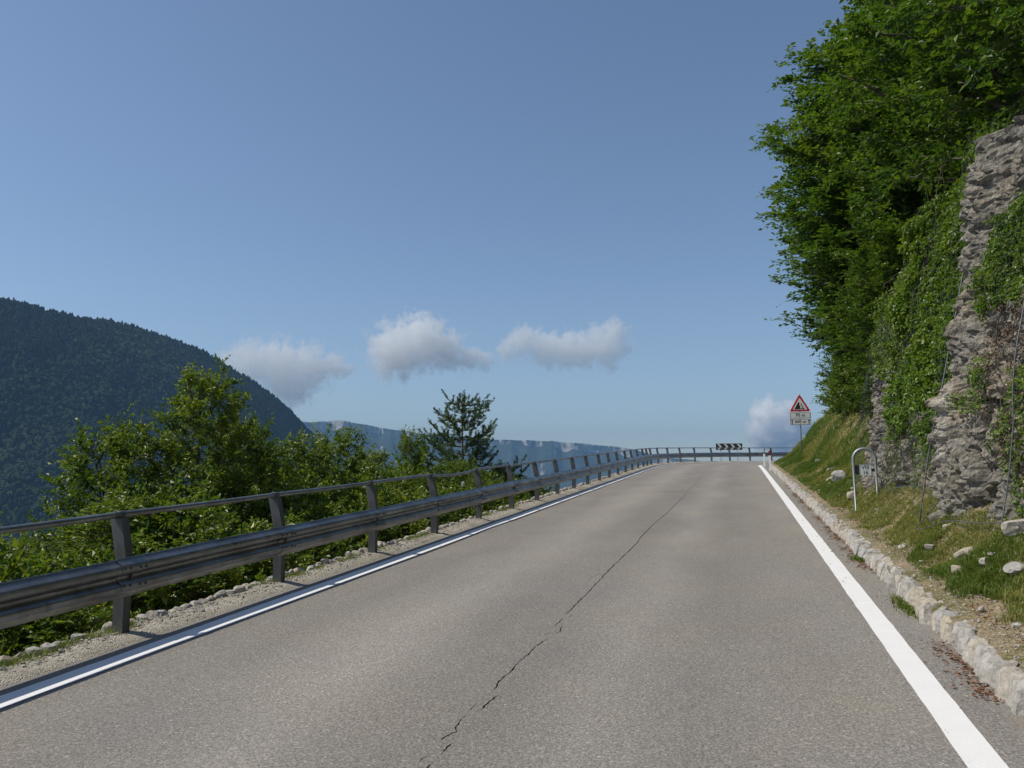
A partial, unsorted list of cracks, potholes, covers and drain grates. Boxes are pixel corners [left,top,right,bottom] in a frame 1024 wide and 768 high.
crack [419,479,700,768]
